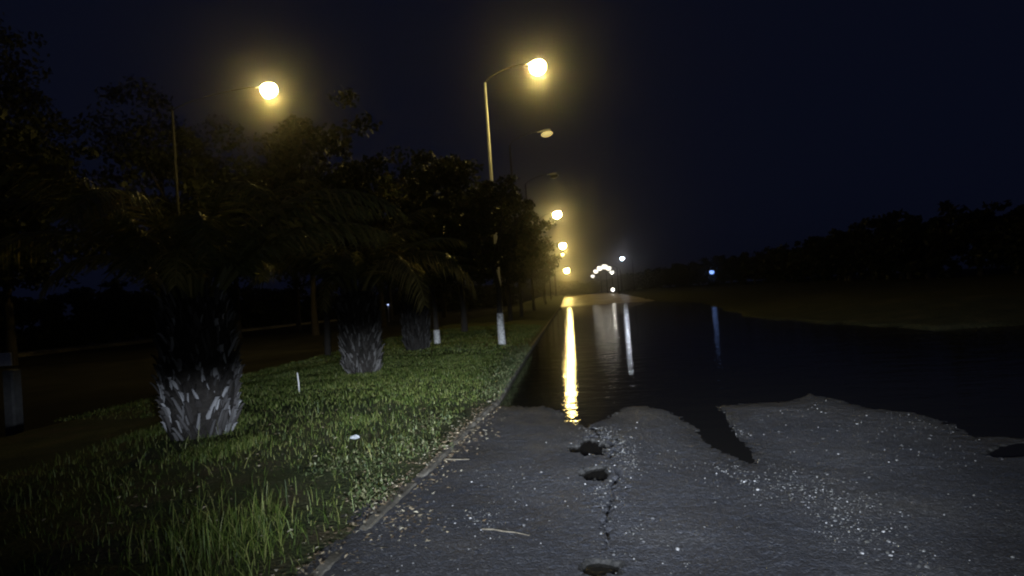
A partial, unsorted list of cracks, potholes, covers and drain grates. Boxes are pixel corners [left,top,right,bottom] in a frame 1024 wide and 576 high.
pothole [577,465,612,482]
pothole [566,438,610,458]
crack [582,427,633,550]
pothole [578,558,626,576]
